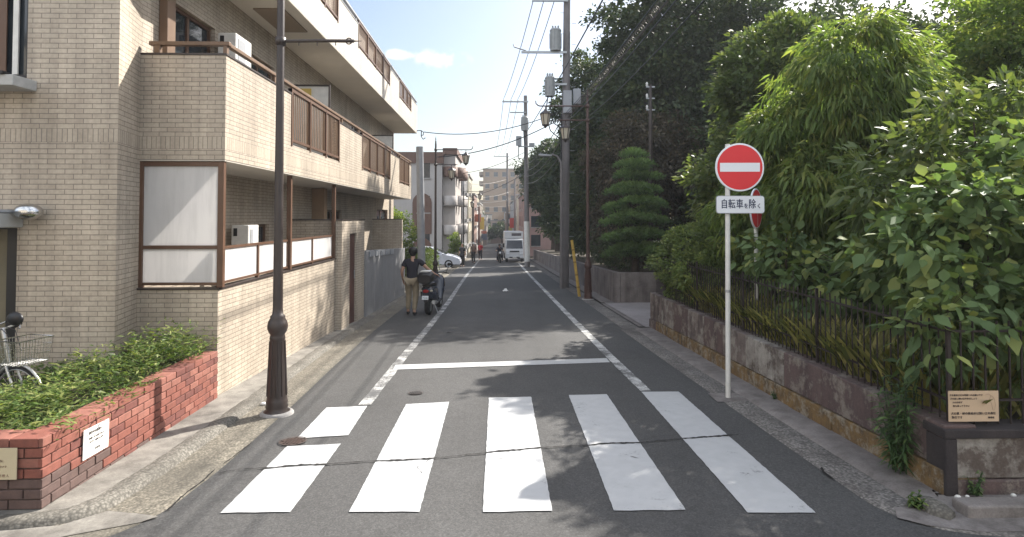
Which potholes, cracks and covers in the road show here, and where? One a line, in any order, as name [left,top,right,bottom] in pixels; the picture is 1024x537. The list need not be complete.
manhole cover [278,436,307,445]
